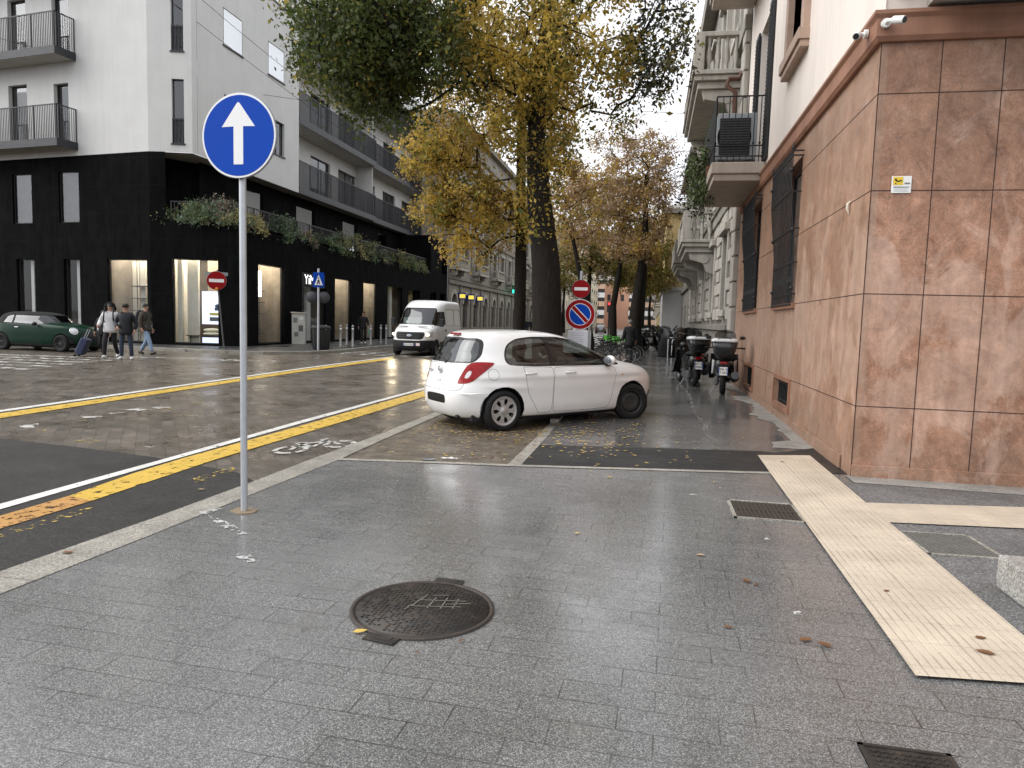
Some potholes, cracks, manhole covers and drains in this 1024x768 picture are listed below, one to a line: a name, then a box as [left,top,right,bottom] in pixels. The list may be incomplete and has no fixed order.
manhole cover [349,577,494,646]
